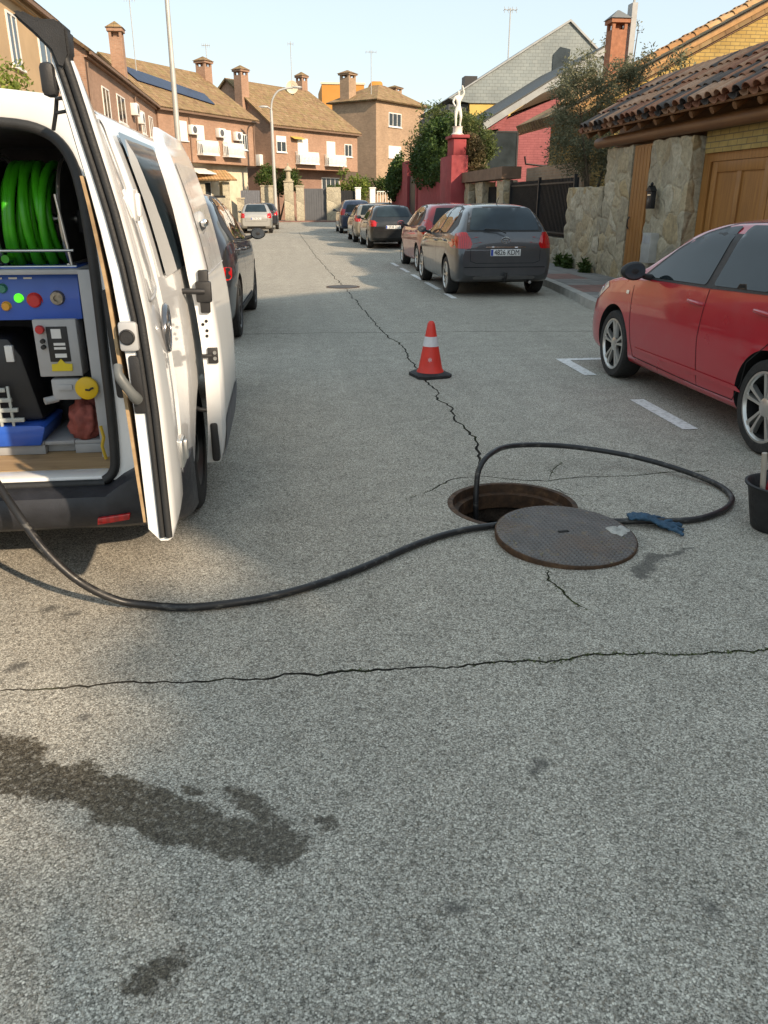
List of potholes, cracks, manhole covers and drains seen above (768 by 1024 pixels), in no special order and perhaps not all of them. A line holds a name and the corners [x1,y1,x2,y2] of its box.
manhole cover [447,482,578,524]
manhole cover [495,505,638,570]
crack [302,238,709,502]
crack [0,647,768,691]
crack [546,569,590,610]
